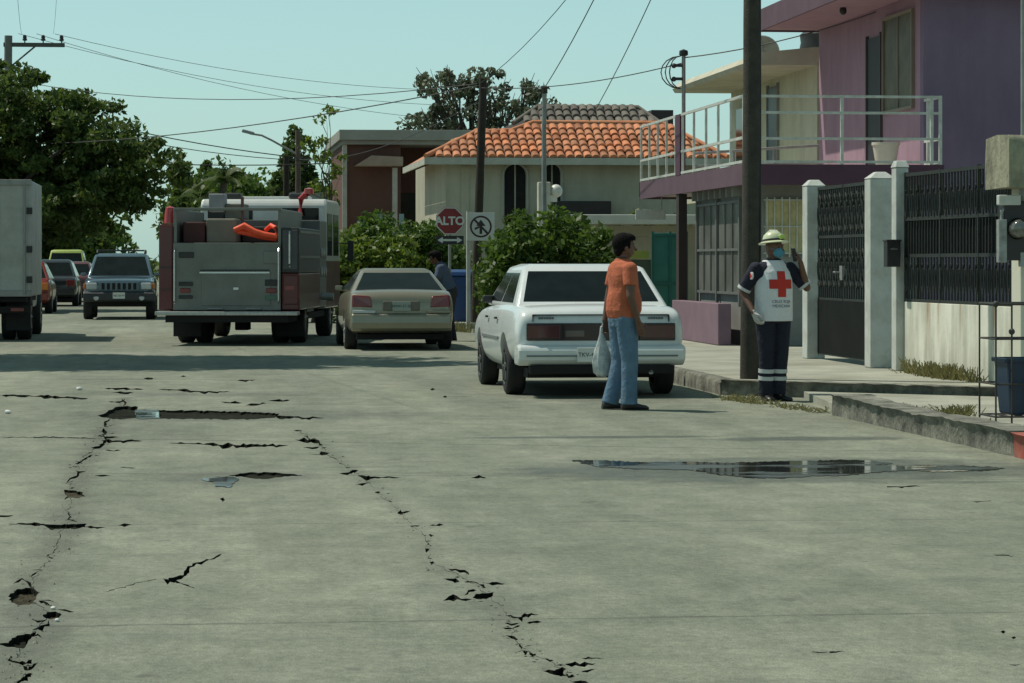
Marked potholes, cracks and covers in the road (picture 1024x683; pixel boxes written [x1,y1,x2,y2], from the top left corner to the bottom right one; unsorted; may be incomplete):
pothole [8,572,53,607]
pothole [98,399,138,421]
crack [7,380,289,683]
crack [294,430,578,682]
pothole [159,410,319,420]
